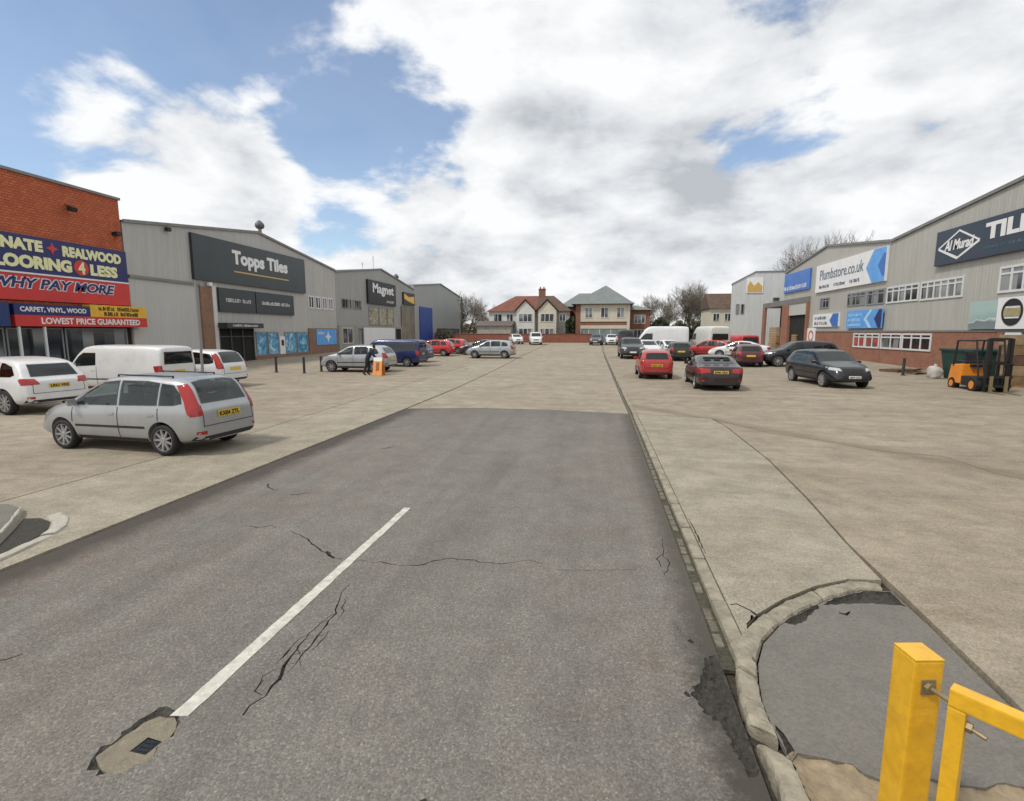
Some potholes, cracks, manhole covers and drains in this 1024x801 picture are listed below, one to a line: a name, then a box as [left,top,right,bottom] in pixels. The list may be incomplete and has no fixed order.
pothole [691,655,759,778]
crack [730,604,759,627]
pothole [826,591,903,606]
crack [291,531,633,571]
crack [243,587,347,715]
pothole [788,606,819,625]
